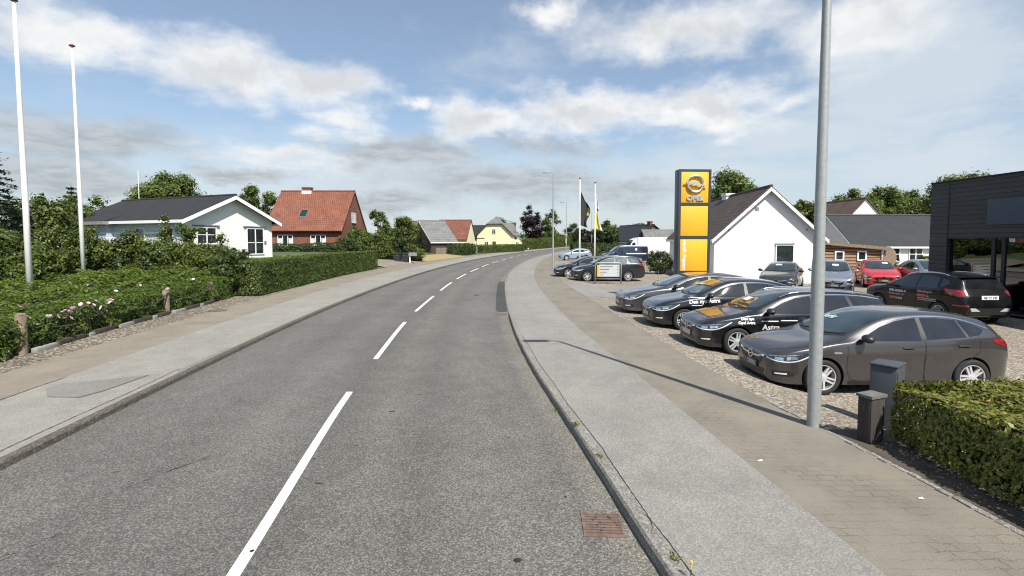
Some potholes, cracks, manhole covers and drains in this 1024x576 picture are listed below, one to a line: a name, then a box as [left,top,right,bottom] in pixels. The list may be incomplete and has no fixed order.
drain grate [581,512,626,538]
